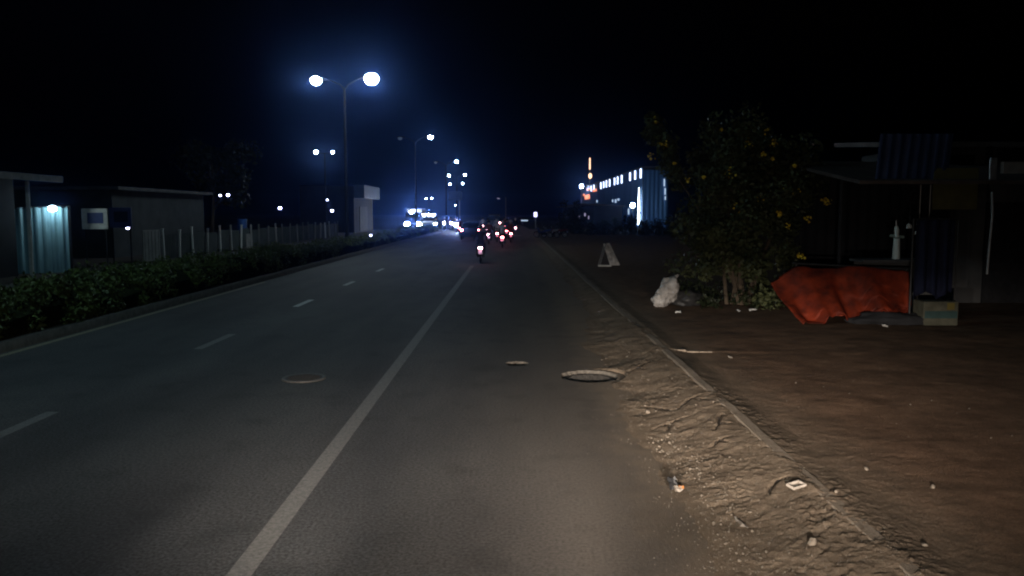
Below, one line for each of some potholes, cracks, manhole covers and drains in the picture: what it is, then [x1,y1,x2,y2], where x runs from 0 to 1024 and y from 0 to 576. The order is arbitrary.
manhole cover [281,373,326,383]
crack [649,397,728,446]
manhole cover [561,370,618,383]
